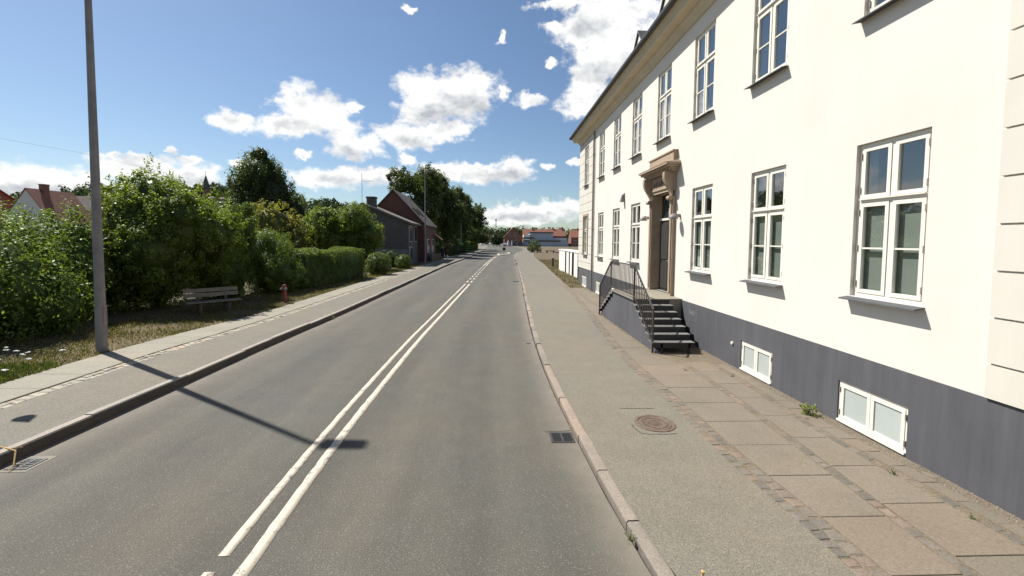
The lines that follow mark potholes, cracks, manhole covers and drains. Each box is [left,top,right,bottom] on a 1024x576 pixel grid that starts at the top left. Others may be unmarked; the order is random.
drain grate [549,432,575,443]
drain grate [0,456,57,473]
manhole cover [634,415,676,432]
